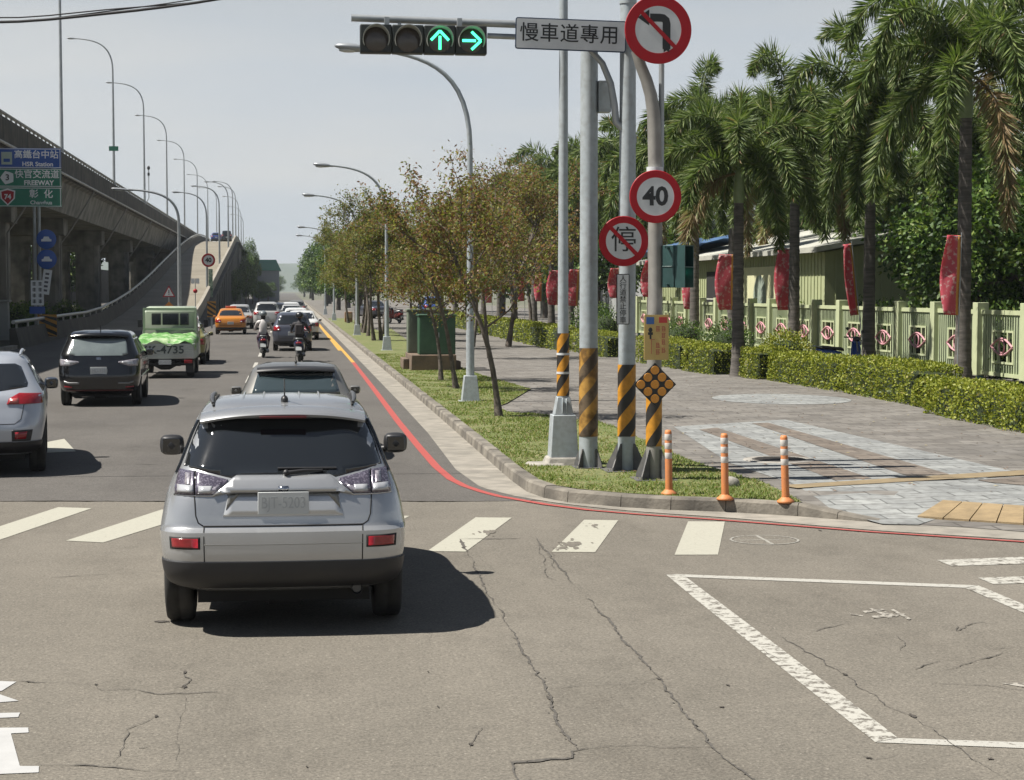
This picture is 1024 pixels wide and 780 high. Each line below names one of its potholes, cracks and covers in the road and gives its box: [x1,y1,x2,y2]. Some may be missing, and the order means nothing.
crack [762,622,910,715]
crack [896,635,1021,690]
crack [460,538,756,780]
crack [19,662,218,756]
manhole cover [730,535,799,544]
